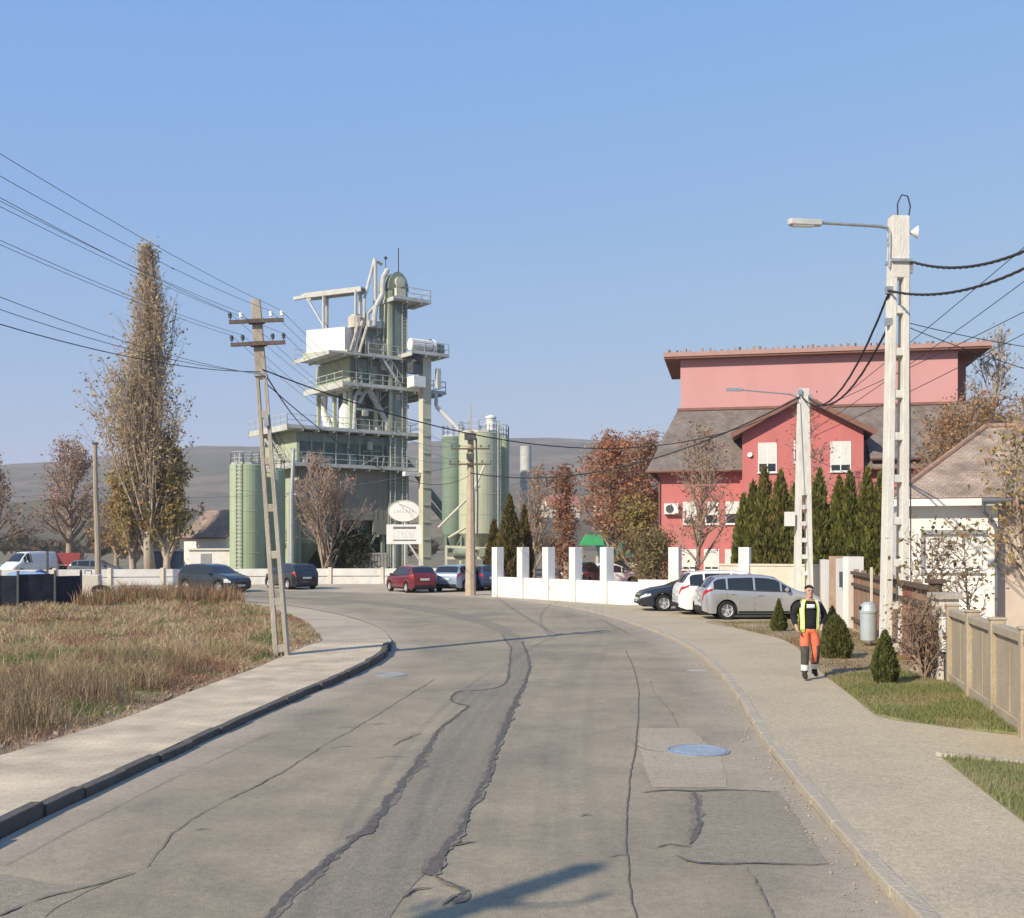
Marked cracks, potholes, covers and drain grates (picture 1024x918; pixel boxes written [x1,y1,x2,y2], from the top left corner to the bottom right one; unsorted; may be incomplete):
manhole cover [666,744,730,757]
crack [449,634,512,706]
crack [645,789,816,918]
crack [401,886,472,905]
crack [0,680,432,915]
